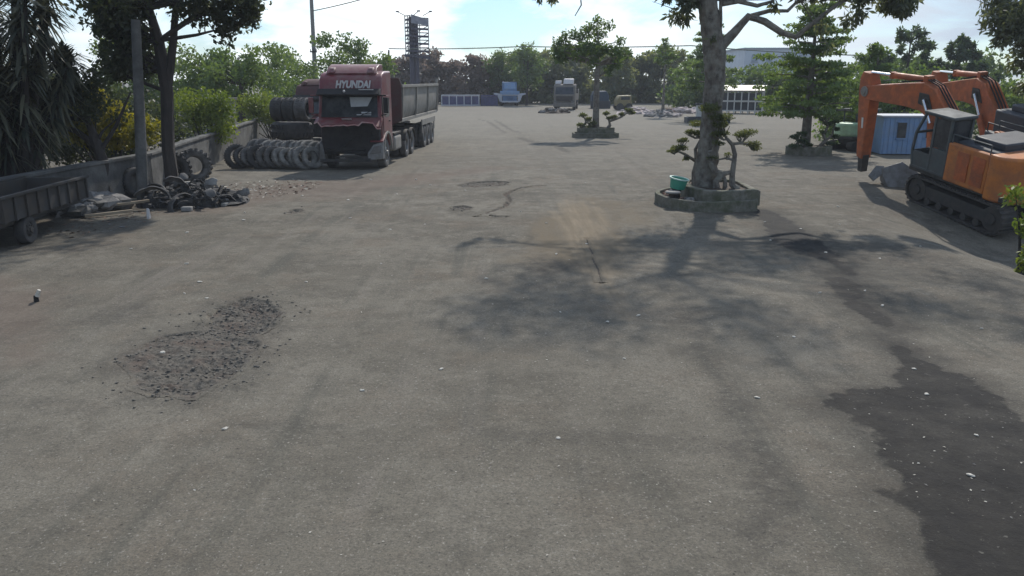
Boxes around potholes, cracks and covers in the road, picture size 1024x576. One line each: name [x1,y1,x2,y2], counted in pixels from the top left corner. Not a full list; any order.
pothole [81,290,311,413]
crack [581,238,609,283]
crack [470,185,544,218]
